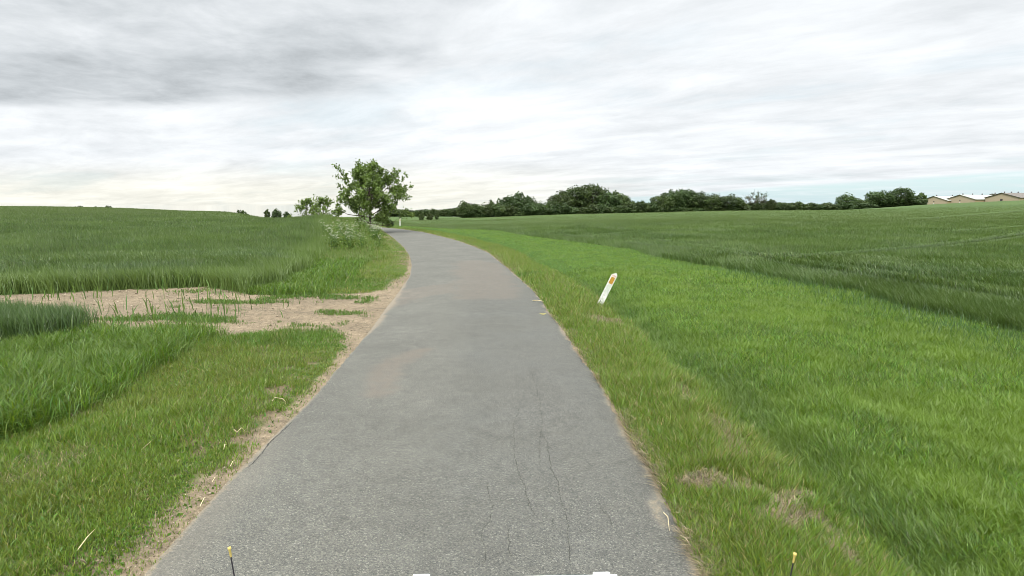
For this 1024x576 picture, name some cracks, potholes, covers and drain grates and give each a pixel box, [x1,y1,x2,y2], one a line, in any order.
crack [513,378,570,560]
